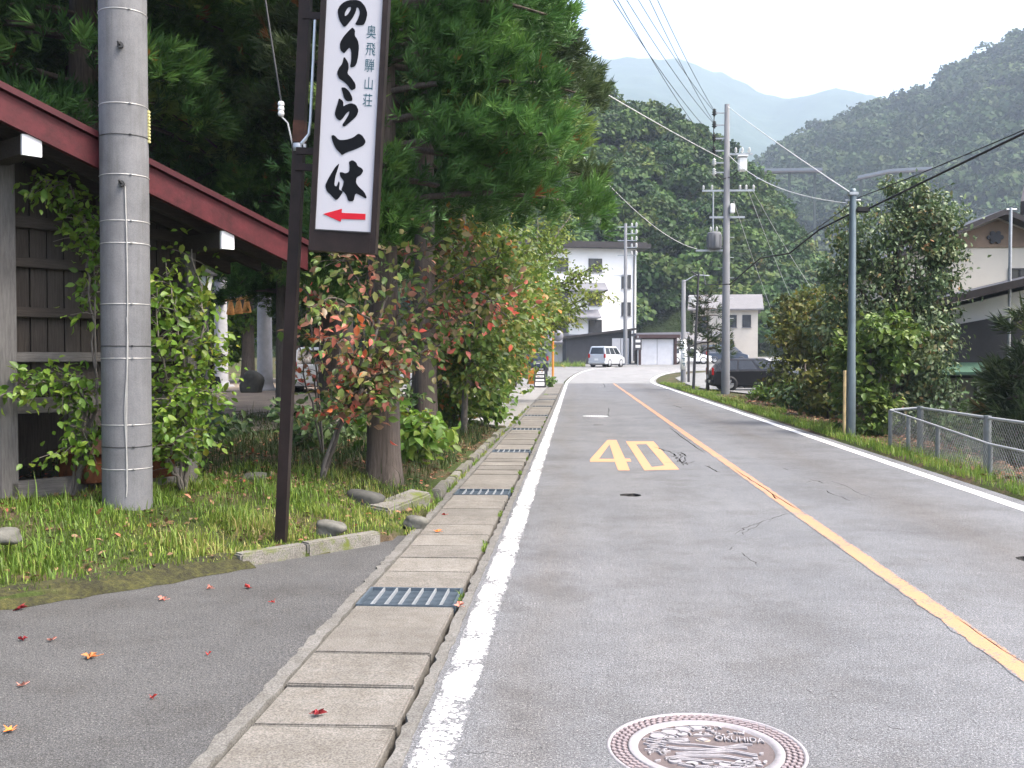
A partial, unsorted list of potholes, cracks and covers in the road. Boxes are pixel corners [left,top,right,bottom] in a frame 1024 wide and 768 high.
drain grate [355,587,463,614]
manhole cover [606,713,809,768]
crack [658,448,717,472]
drain grate [454,489,512,499]
